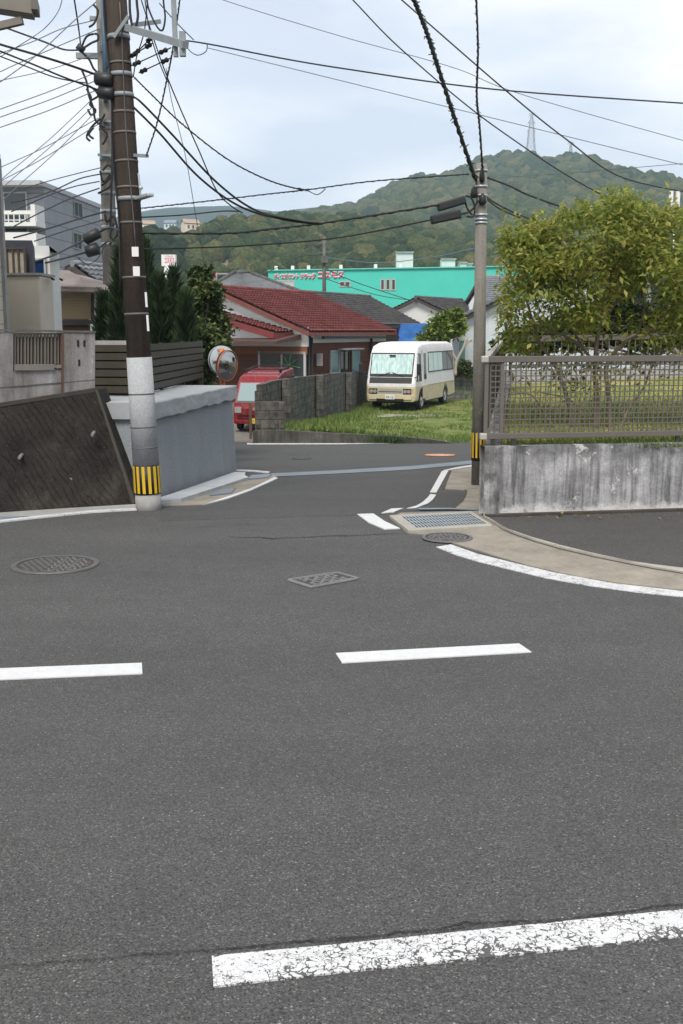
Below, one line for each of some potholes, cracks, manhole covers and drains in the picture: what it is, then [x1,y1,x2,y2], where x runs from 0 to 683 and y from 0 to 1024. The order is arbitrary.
crack [199,523,392,539]
manhole cover [287,572,359,588]
drain grate [389,511,492,532]
manhole cover [10,555,99,574]
manhole cover [422,532,473,543]
